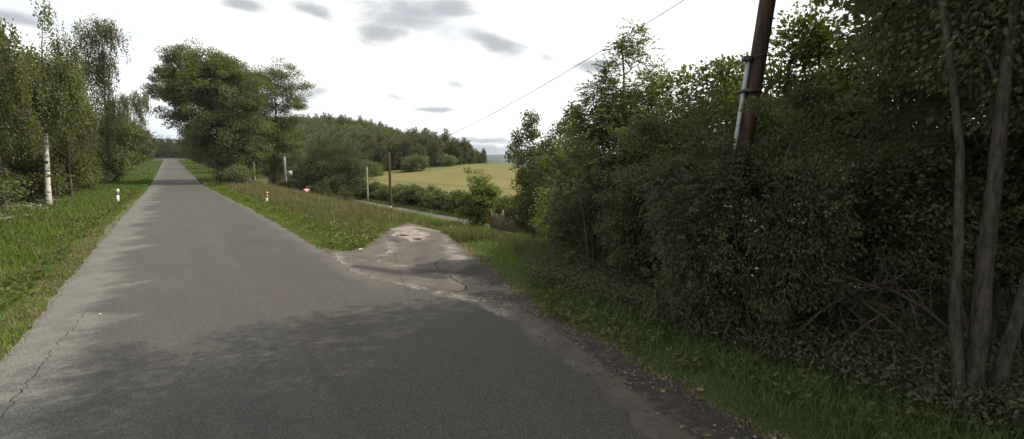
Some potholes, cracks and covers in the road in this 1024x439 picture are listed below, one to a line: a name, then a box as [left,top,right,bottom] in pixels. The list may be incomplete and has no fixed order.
pothole [391,229,430,242]
crack [0,311,87,419]
